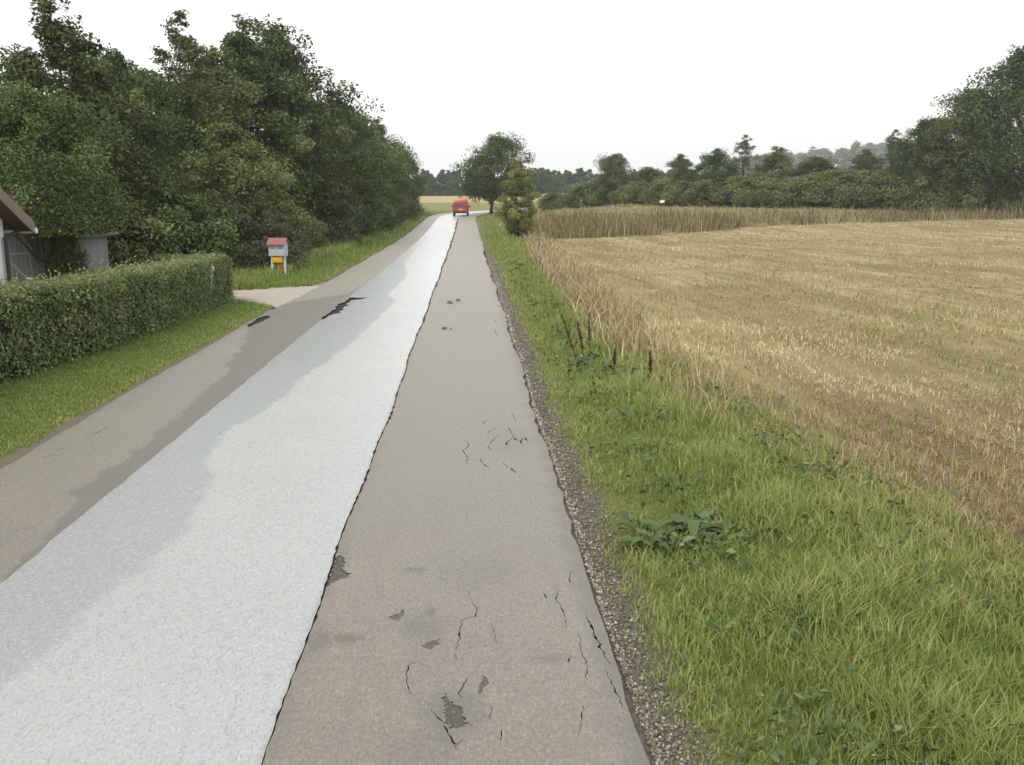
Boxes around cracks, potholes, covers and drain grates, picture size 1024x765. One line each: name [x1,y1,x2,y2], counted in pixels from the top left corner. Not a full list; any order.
pothole [325,555,352,587]
crack [543,570,624,709]
crack [454,591,497,697]
crack [463,414,529,473]
pothole [322,297,364,320]
pothole [441,693,466,729]
crack [405,662,472,748]
